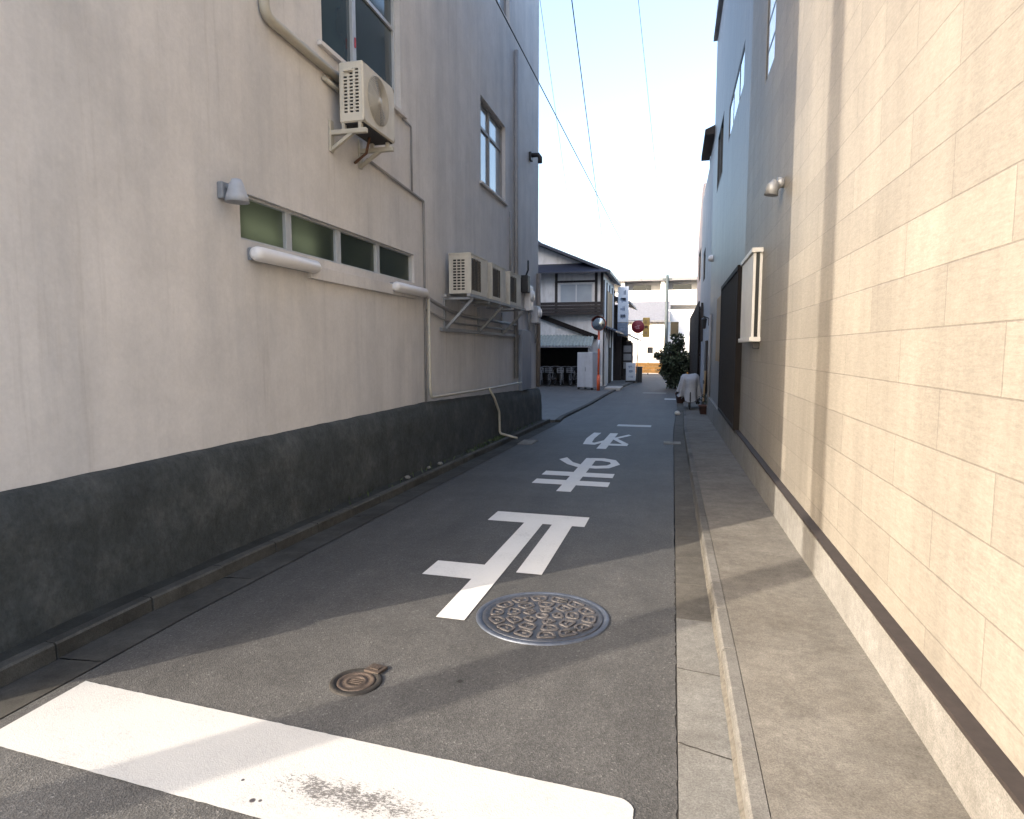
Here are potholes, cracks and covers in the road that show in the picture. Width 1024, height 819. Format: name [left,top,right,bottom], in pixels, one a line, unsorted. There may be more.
manhole cover [476,592,610,646]
utility cover [329,663,388,696]
